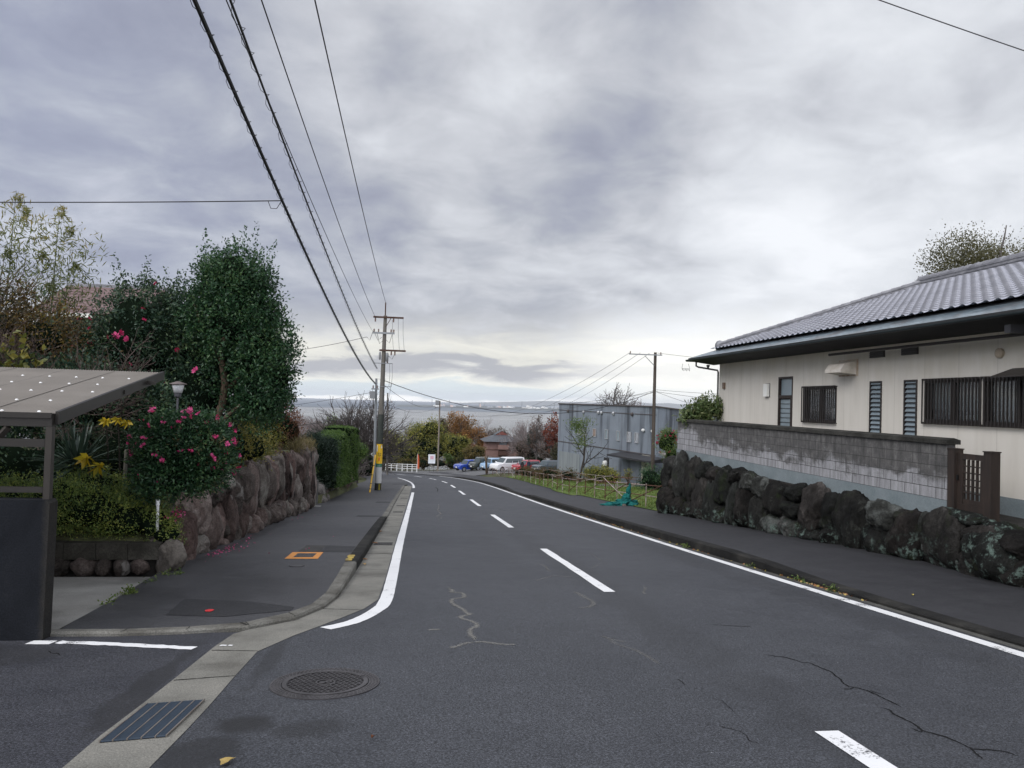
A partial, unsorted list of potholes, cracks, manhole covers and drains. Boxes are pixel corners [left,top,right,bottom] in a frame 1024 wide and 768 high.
manhole cover [269,668,380,700]
drain grate [99,699,205,743]
crack [766,654,1017,758]
crack [430,589,515,648]
